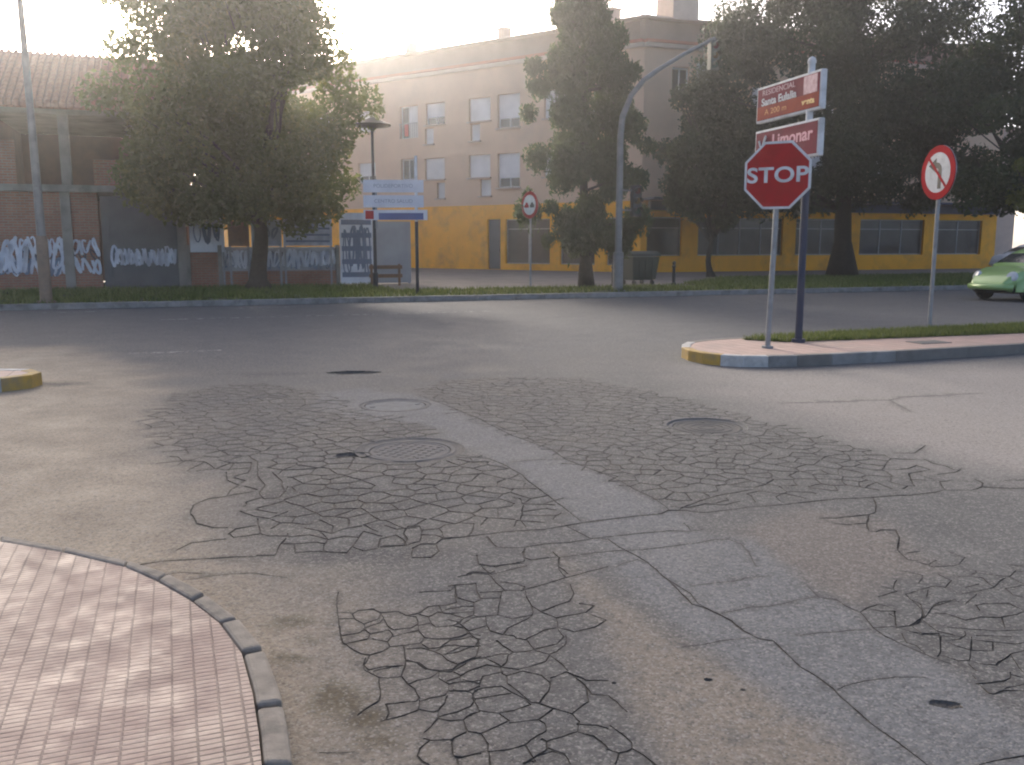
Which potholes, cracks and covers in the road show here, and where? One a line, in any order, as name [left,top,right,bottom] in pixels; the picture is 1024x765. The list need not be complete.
manhole cover [354,438,465,463]
crack [136,377,1024,765]
pothole [929,699,963,709]
manhole cover [359,399,431,412]
manhole cover [666,418,749,434]
